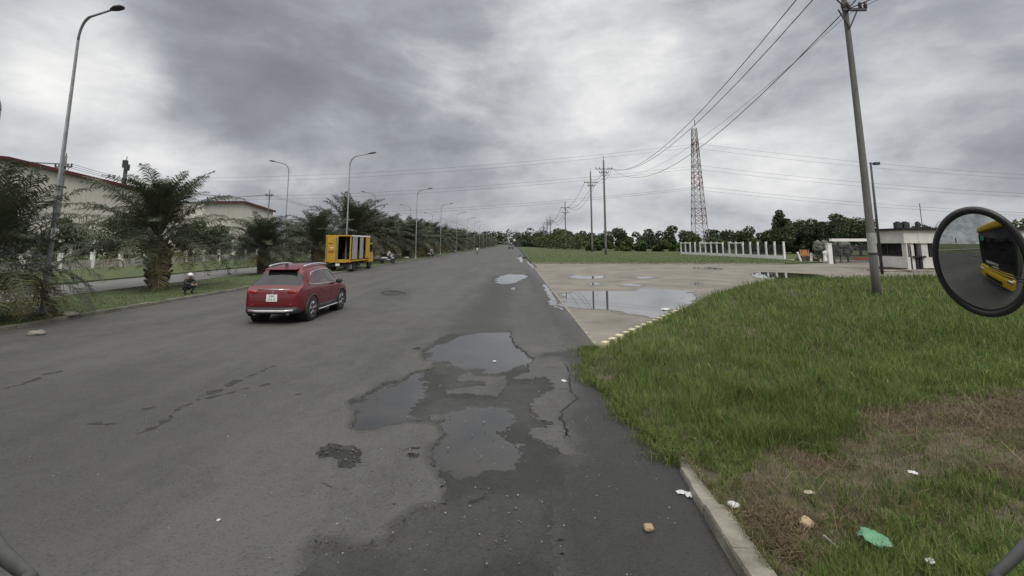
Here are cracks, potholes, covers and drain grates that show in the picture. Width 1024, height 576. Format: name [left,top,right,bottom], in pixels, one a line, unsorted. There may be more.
pothole [491,274,530,284]
pothole [294,329,587,576]
crack [558,364,580,440]
